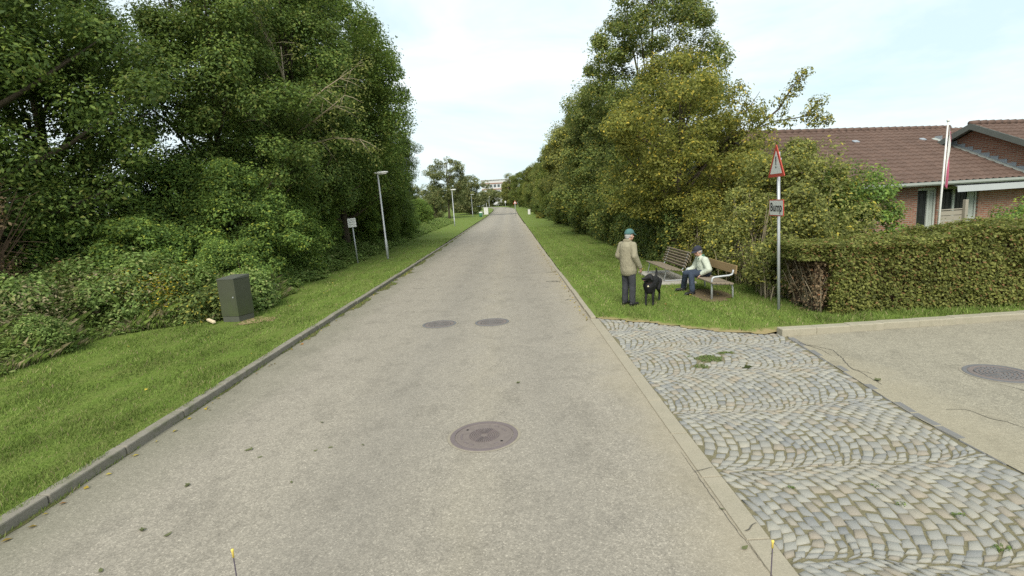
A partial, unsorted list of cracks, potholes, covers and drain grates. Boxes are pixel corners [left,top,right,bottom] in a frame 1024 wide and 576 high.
manhole cover [421,320,458,329]
manhole cover [474,318,510,326]
manhole cover [959,364,1024,384]
manhole cover [448,420,521,453]
